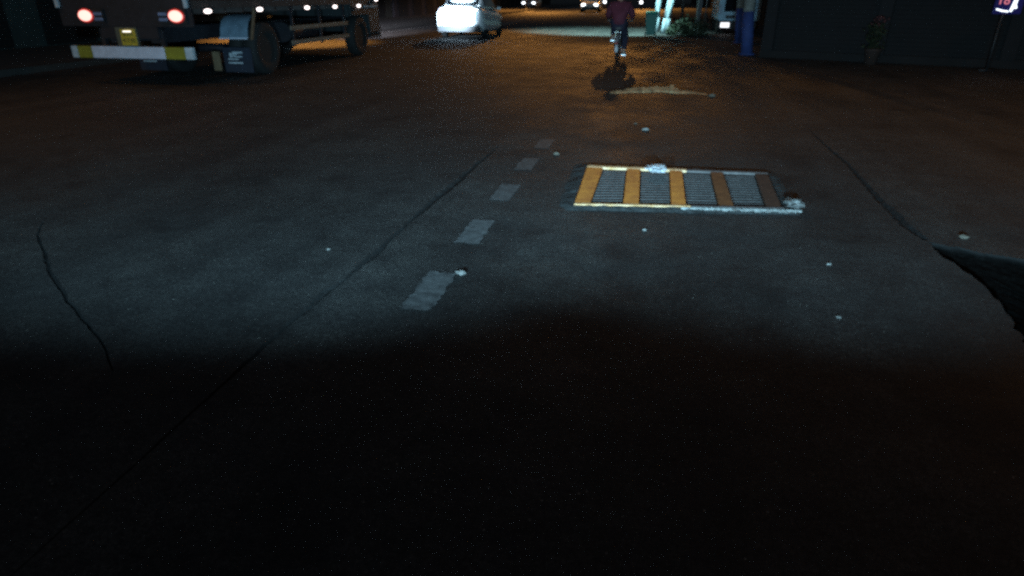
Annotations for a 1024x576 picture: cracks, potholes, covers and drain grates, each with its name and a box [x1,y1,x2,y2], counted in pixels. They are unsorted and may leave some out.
crack [10,146,499,576]
crack [809,130,931,241]
drain grate [558,164,802,215]
